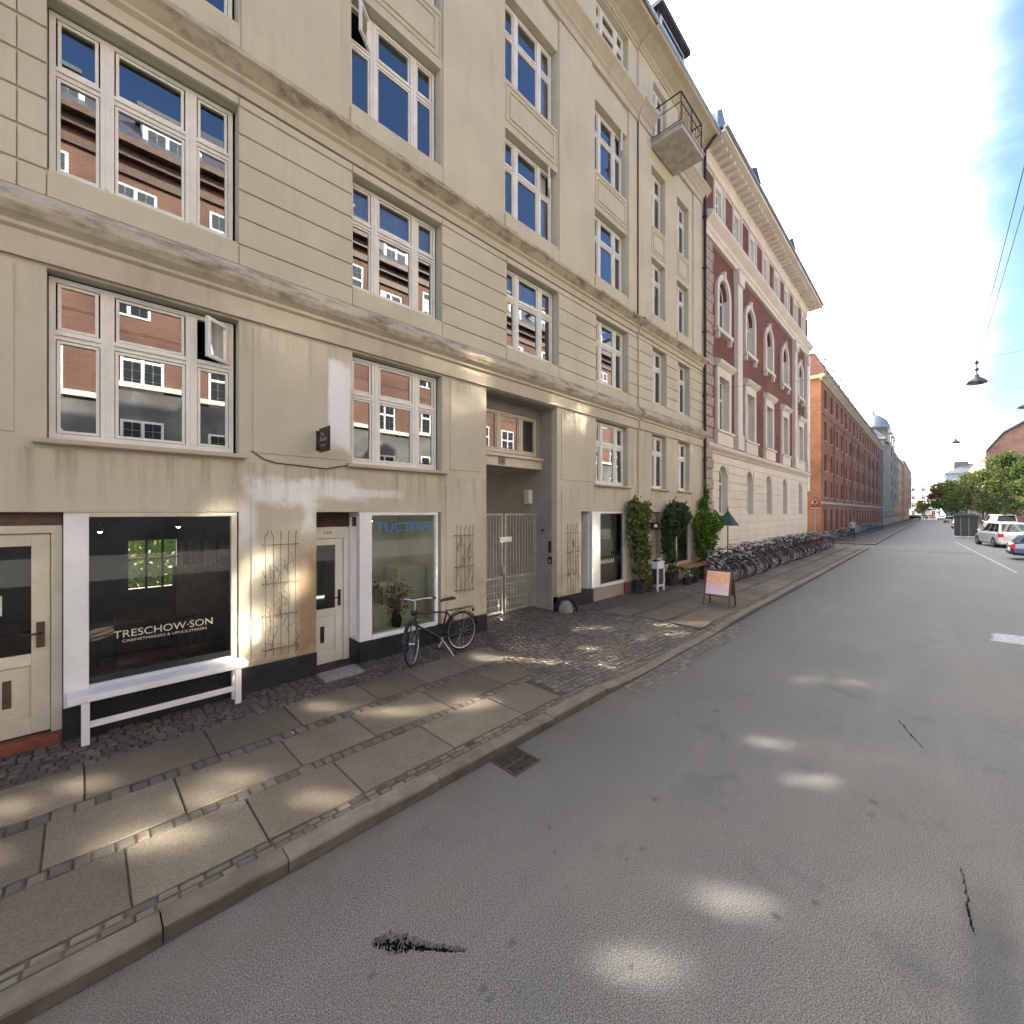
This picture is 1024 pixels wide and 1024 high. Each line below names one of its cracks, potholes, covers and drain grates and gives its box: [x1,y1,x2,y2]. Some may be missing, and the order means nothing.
drain grate [490,747,541,777]
crack [961,869,974,932]
